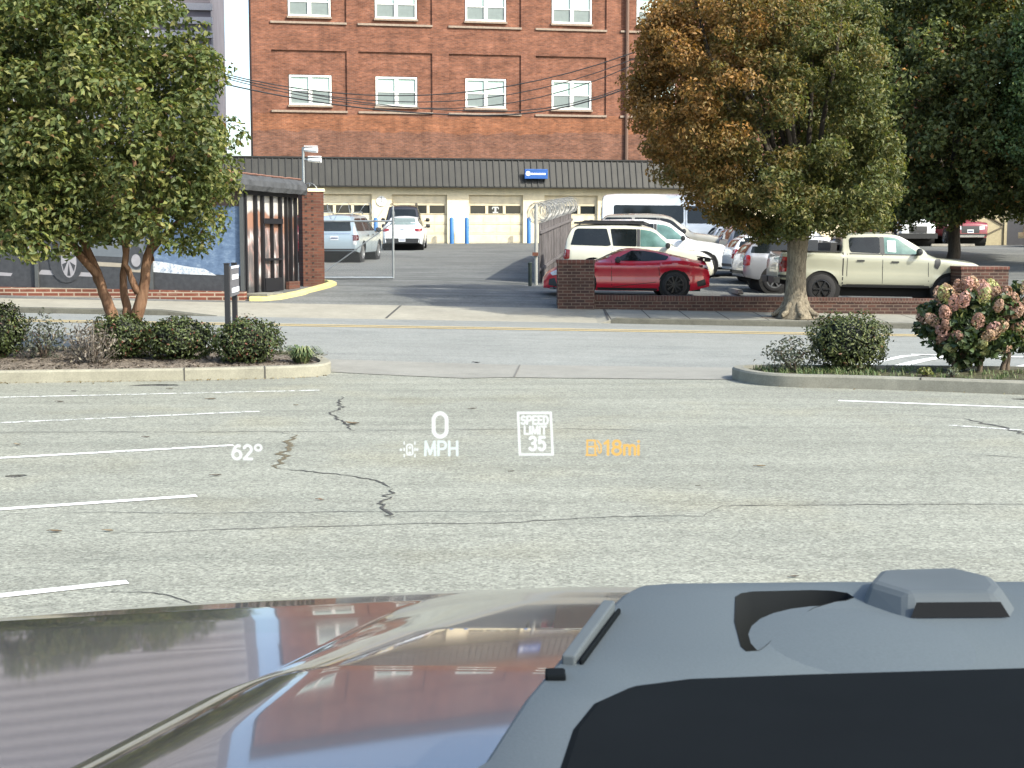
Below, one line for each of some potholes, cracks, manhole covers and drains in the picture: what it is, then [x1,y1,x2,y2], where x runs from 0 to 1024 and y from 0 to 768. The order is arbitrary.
crack [15,431,963,533]
crack [58,397,654,432]
crack [945,417,1024,435]
